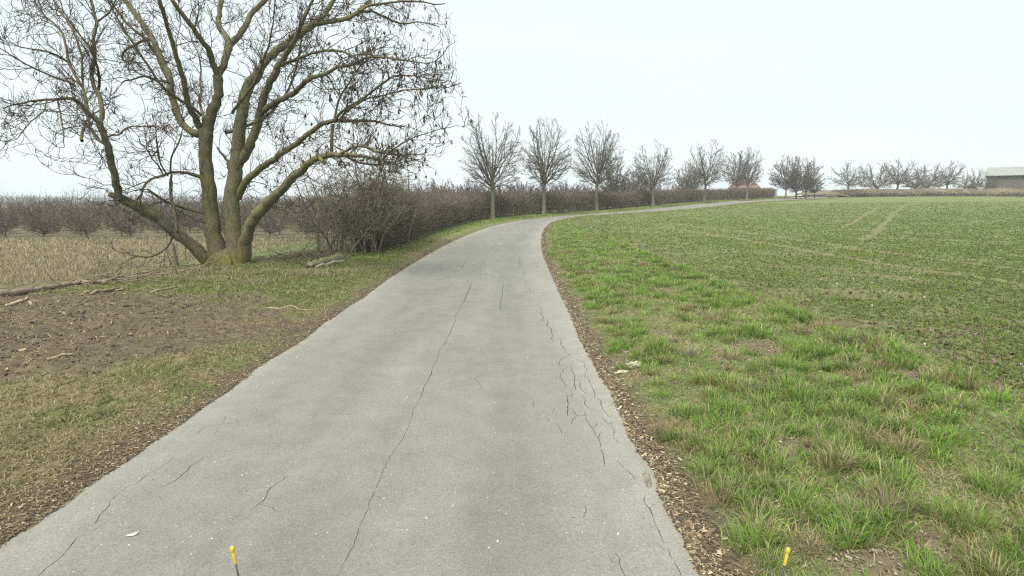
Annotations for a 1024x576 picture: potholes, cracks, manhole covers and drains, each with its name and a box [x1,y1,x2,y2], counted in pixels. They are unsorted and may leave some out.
crack [519,258,681,575]
crack [42,456,205,572]
crack [337,253,489,576]
